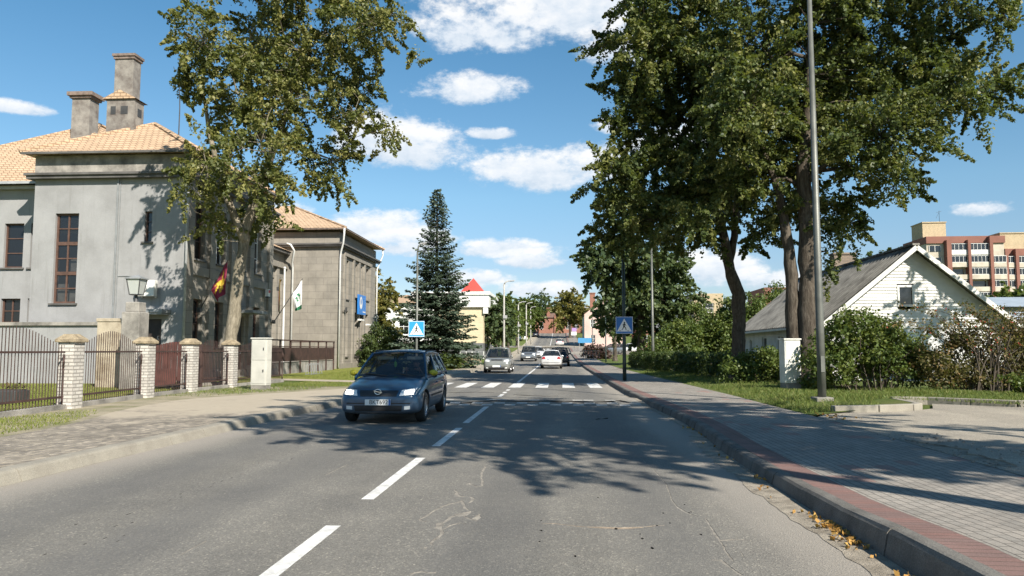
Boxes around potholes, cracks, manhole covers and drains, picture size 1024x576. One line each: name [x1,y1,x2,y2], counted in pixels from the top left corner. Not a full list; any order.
crack [542,460,745,576]
crack [409,466,486,575]
